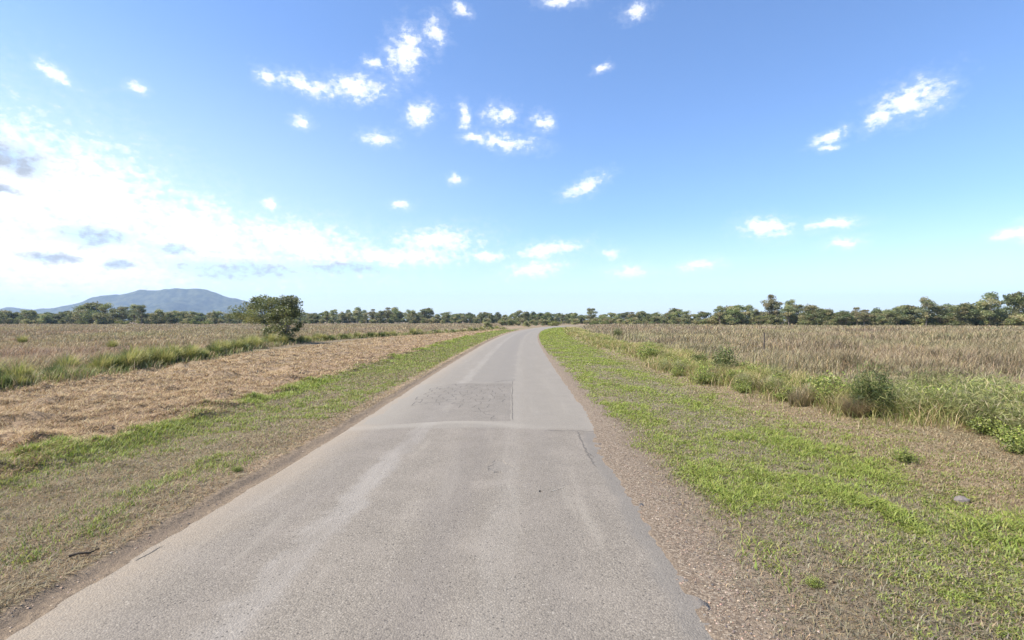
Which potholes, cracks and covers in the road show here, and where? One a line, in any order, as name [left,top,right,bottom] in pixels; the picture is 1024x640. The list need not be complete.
crack [577,431,596,466]
crack [411,380,506,419]
